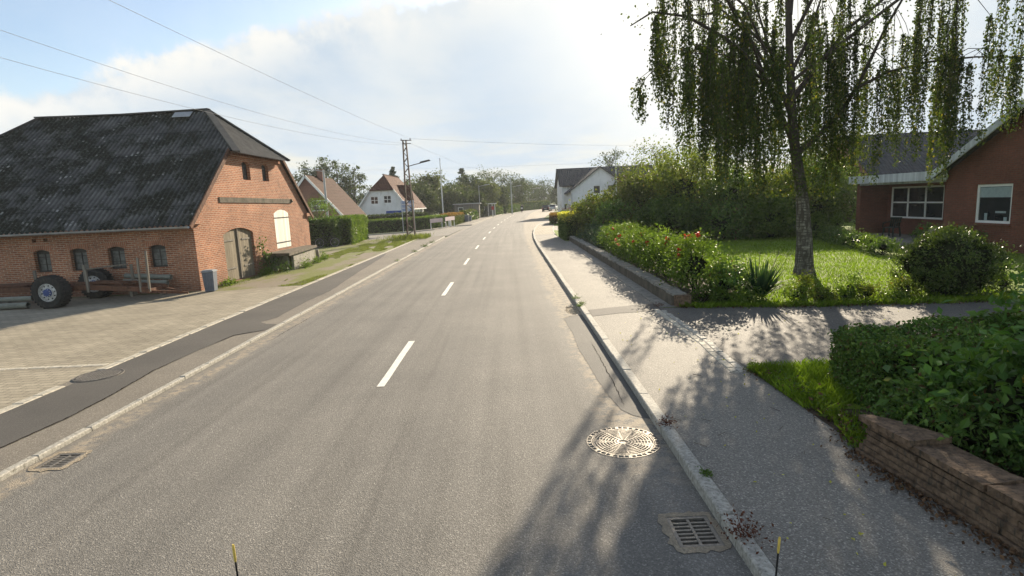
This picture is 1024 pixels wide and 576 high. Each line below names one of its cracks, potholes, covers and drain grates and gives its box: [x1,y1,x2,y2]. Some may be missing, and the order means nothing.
drain grate [28,450,93,472]
manhole cover [586,427,661,458]
manhole cover [72,368,125,382]
drain grate [658,511,732,554]
